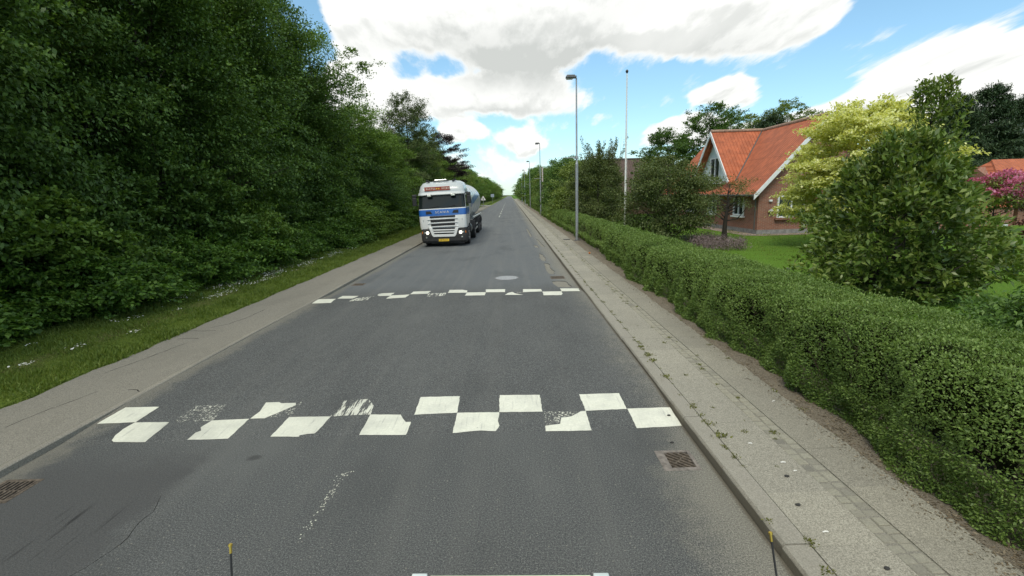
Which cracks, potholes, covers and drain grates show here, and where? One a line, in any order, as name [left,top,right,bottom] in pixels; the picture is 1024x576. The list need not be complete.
drain grate [0,479,44,503]
drain grate [654,450,702,471]
crack [70,496,161,576]
